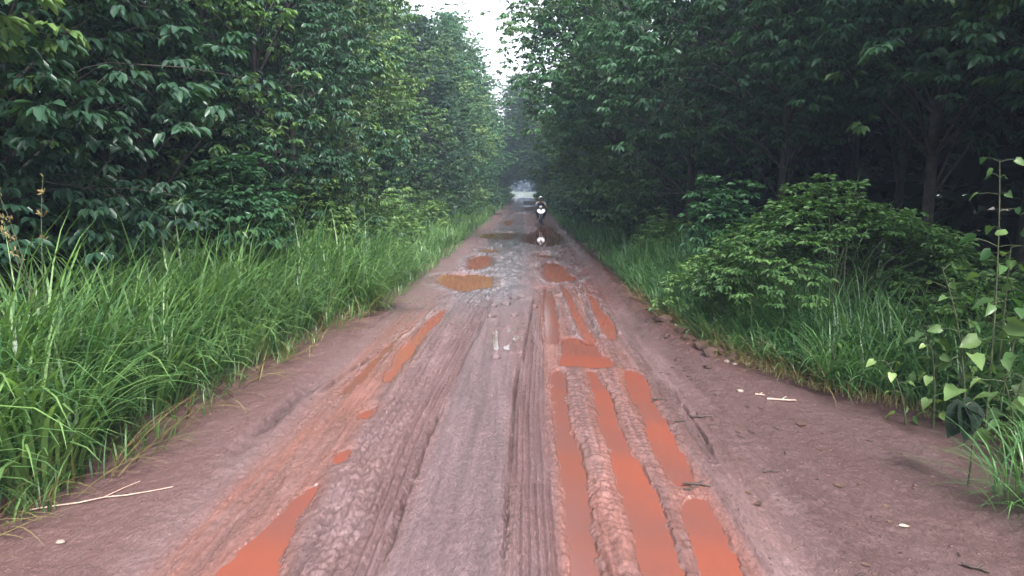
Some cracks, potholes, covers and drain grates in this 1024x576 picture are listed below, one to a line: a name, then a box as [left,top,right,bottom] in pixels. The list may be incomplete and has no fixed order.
pothole [539,261,582,283]
pothole [463,253,496,270]
pothole [476,231,520,240]
pothole [431,270,498,293]
pothole [517,224,567,247]
pothole [554,334,618,369]
